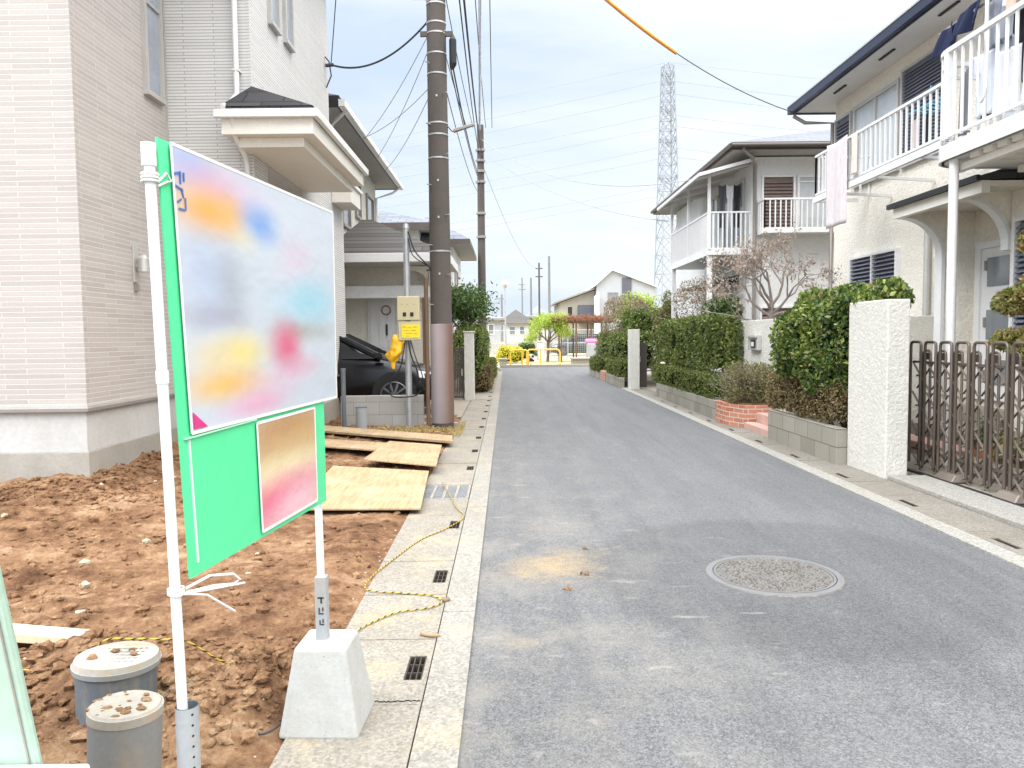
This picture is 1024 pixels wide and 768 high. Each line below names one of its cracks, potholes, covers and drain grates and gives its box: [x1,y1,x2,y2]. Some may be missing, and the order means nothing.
manhole cover [705,555,846,598]
drain grate [423,485,472,499]
